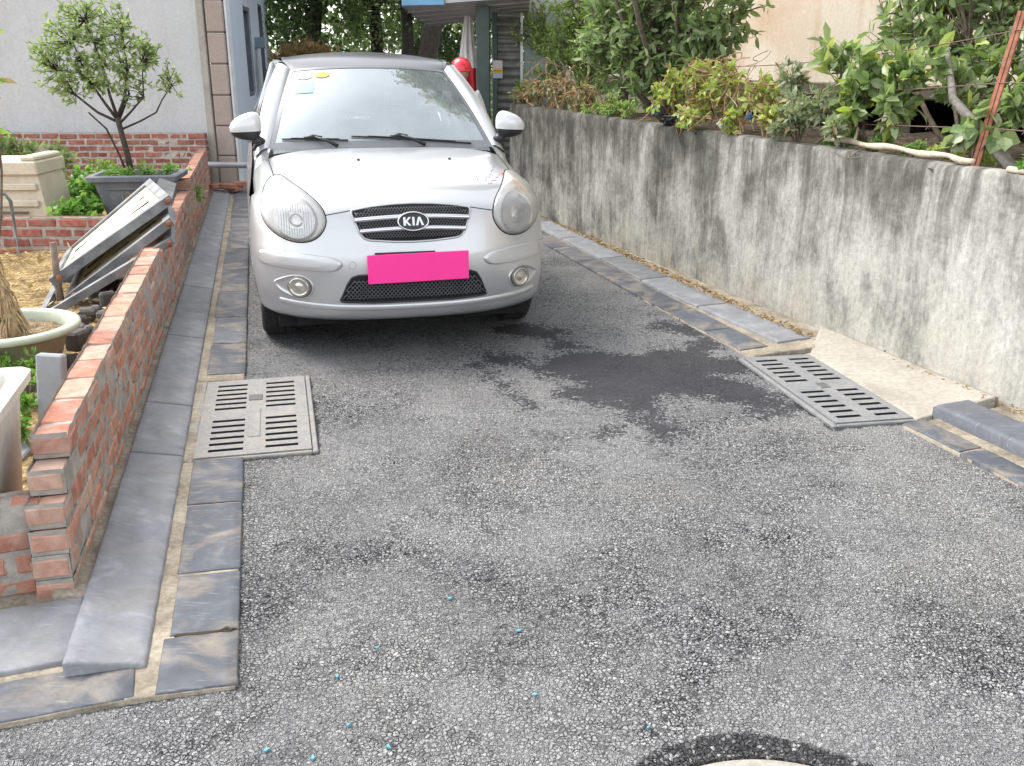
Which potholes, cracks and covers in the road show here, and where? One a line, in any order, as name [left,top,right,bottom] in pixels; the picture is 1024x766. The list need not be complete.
drain grate [186,375,319,463]
drain grate [738,354,916,429]
